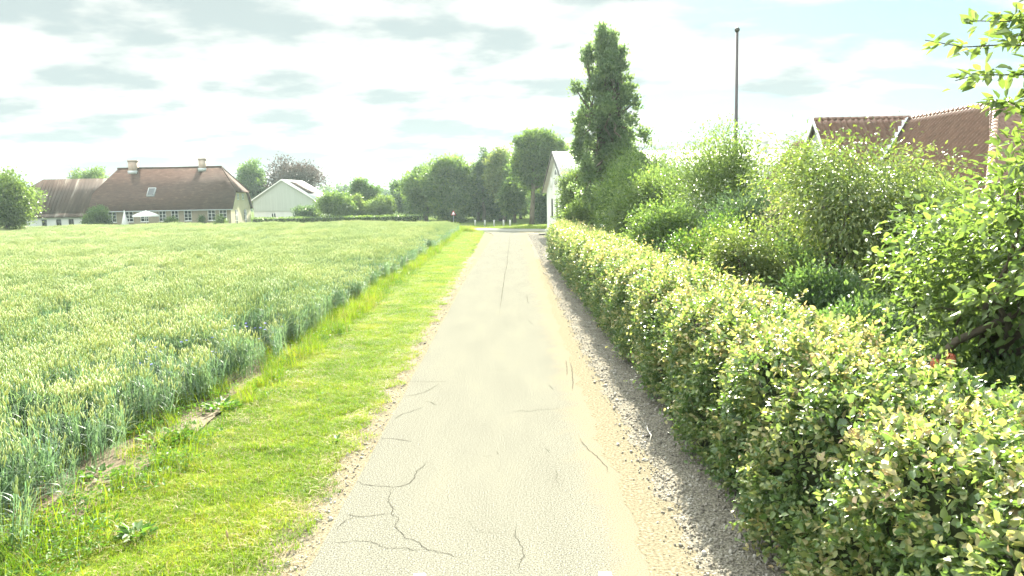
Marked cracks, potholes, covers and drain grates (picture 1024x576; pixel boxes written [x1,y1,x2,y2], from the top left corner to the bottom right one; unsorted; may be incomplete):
crack [336,463,474,557]
